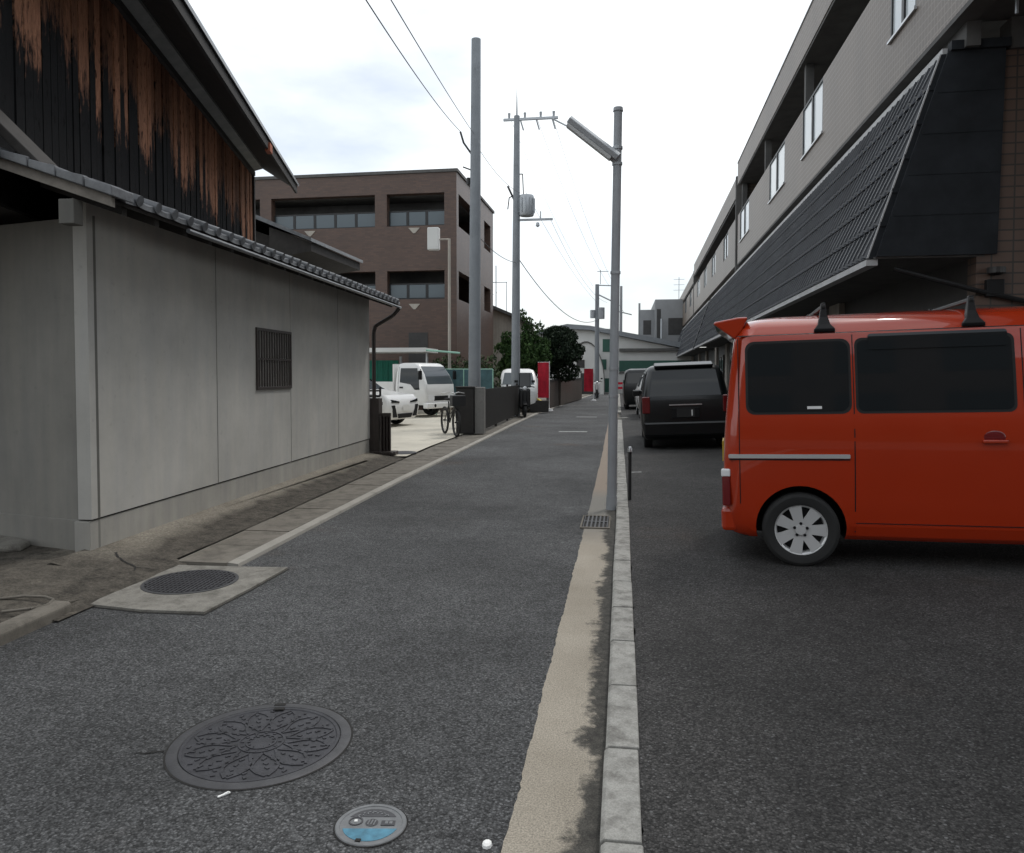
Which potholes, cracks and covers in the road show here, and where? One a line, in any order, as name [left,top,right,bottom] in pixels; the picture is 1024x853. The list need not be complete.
manhole cover [333,804,408,848]
drain grate [580,515,611,529]
manhole cover [163,703,353,791]
